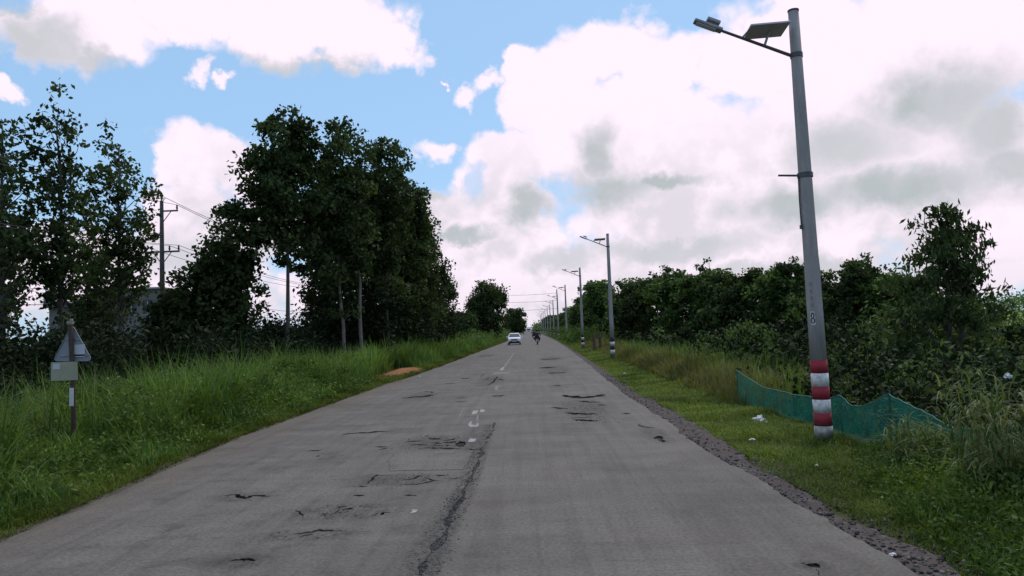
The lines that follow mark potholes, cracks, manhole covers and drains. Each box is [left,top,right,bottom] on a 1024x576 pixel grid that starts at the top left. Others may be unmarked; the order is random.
crack [343,422,496,576]
